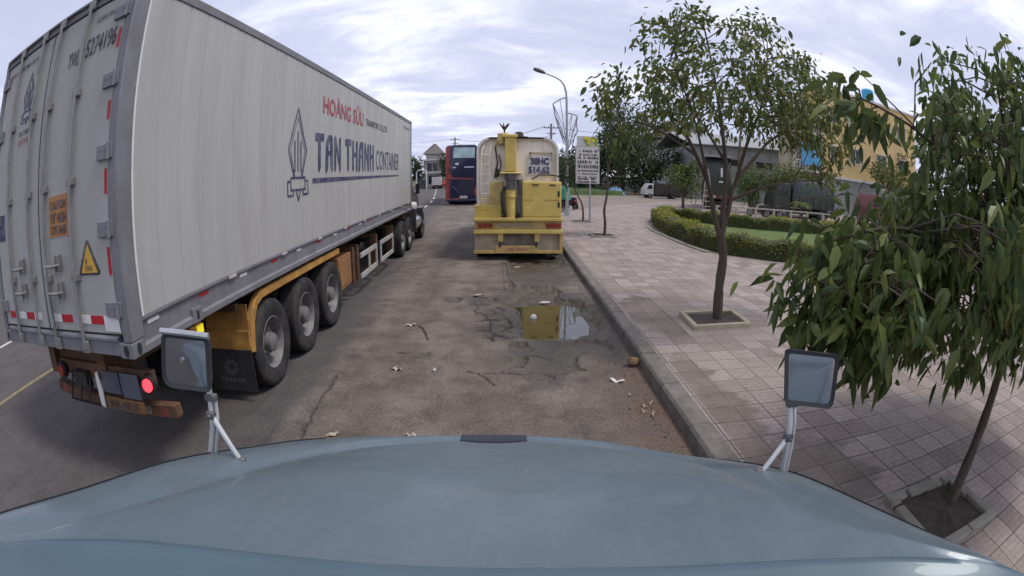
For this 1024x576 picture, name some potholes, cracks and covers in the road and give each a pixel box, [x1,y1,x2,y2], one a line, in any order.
crack [466,355,568,386]
pothole [487,286,609,341]
crack [469,262,515,342]
crack [394,325,429,354]
